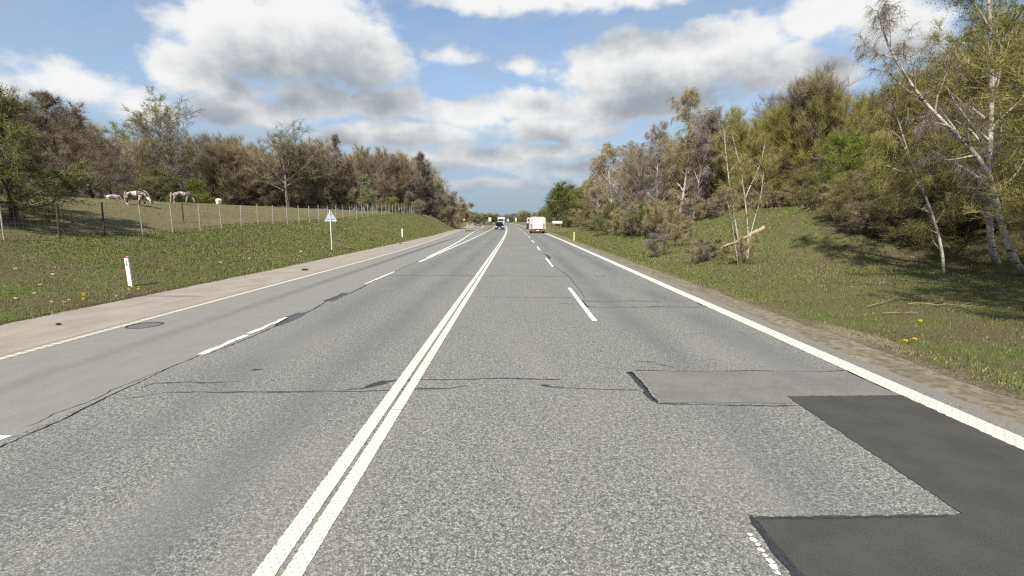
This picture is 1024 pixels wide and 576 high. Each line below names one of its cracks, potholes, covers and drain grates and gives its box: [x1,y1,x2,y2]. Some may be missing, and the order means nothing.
crack [535,297,705,308]
crack [23,361,898,428]
